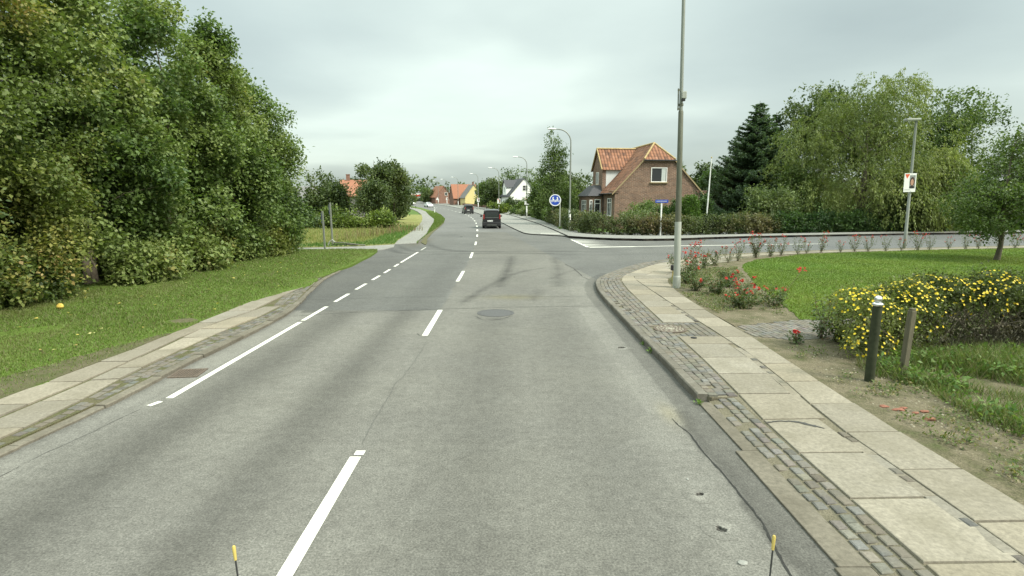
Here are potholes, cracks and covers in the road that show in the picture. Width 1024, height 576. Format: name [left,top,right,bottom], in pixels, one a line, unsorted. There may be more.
crack [362,333,427,443]
manhole cover [477,309,514,317]
manhole cover [654,325,687,333]
drain grate [167,368,208,378]
crack [672,418,823,576]
